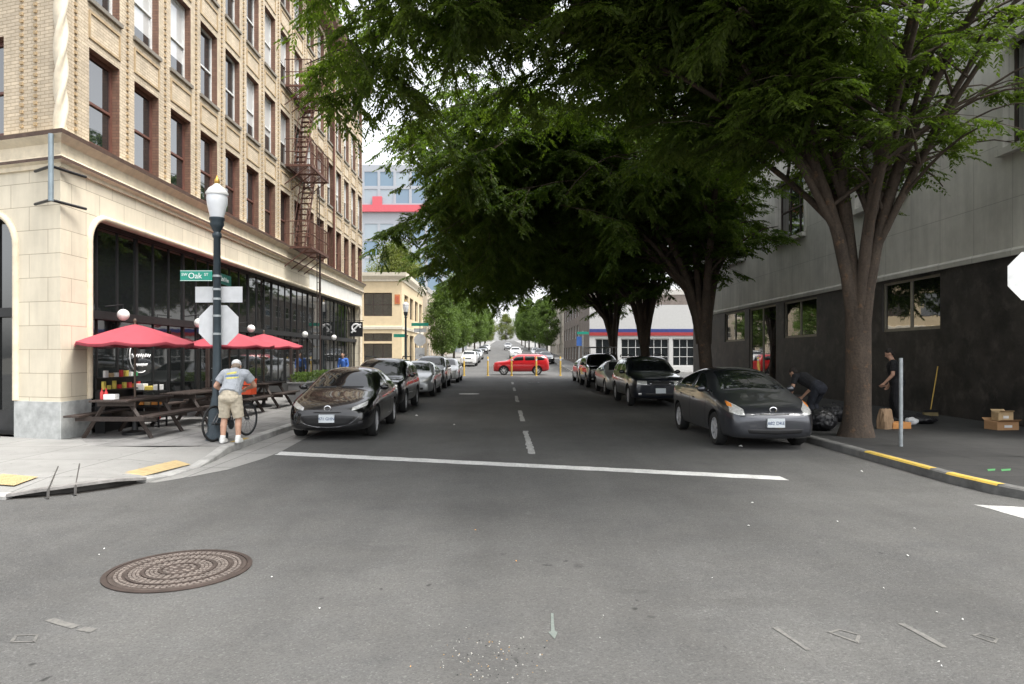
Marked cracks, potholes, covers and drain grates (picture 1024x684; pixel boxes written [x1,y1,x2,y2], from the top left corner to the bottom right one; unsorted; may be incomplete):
manhole cover [100,549,252,593]
